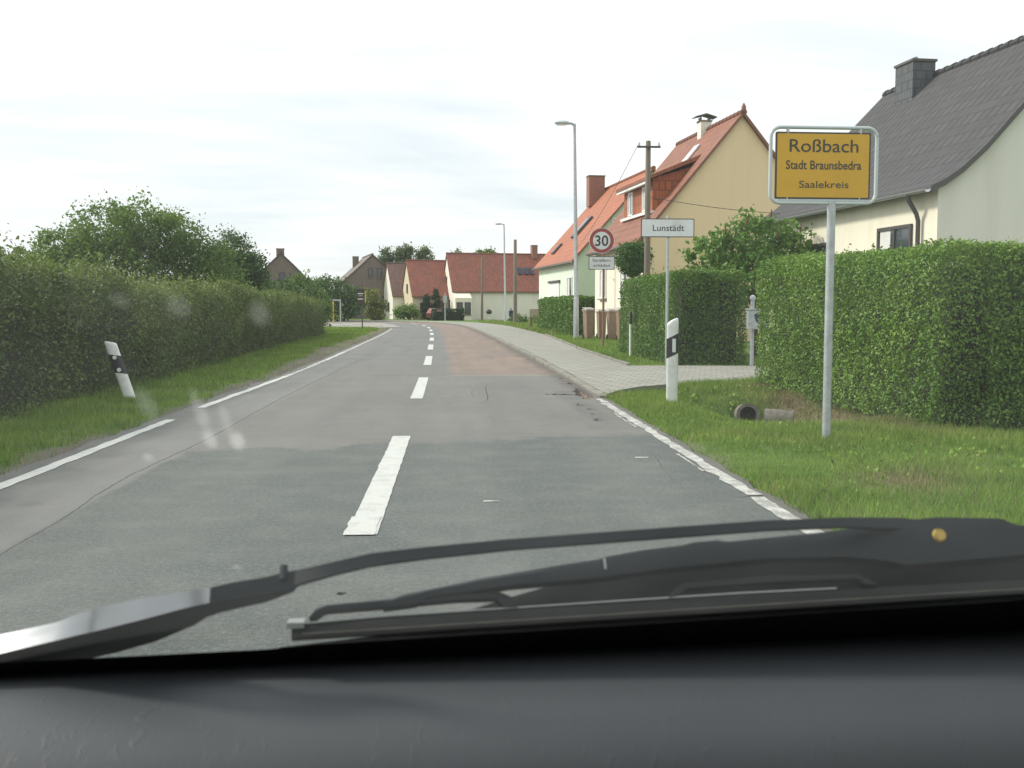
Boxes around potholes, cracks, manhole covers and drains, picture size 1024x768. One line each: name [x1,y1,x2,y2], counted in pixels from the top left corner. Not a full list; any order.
crack [647,448,712,507]
